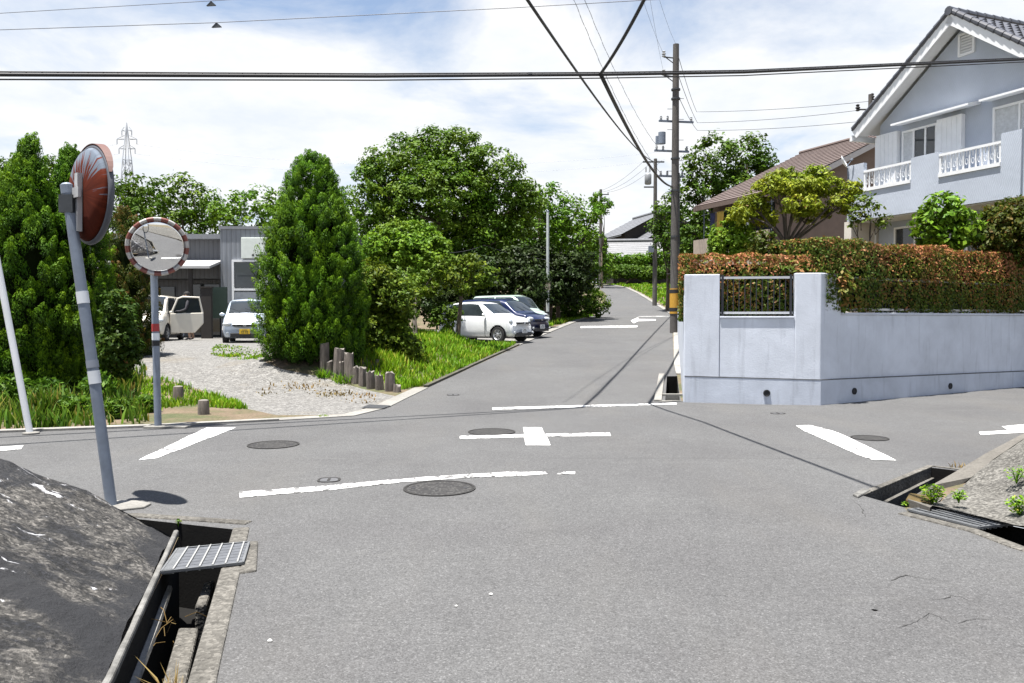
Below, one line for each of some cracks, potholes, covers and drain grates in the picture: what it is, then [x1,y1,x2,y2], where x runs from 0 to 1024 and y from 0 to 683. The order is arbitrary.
drain grate [160,541,250,575]
manhole cover [247,440,300,449]
crack [893,574,981,626]
drain grate [907,506,1013,530]
manhole cover [403,480,476,497]
